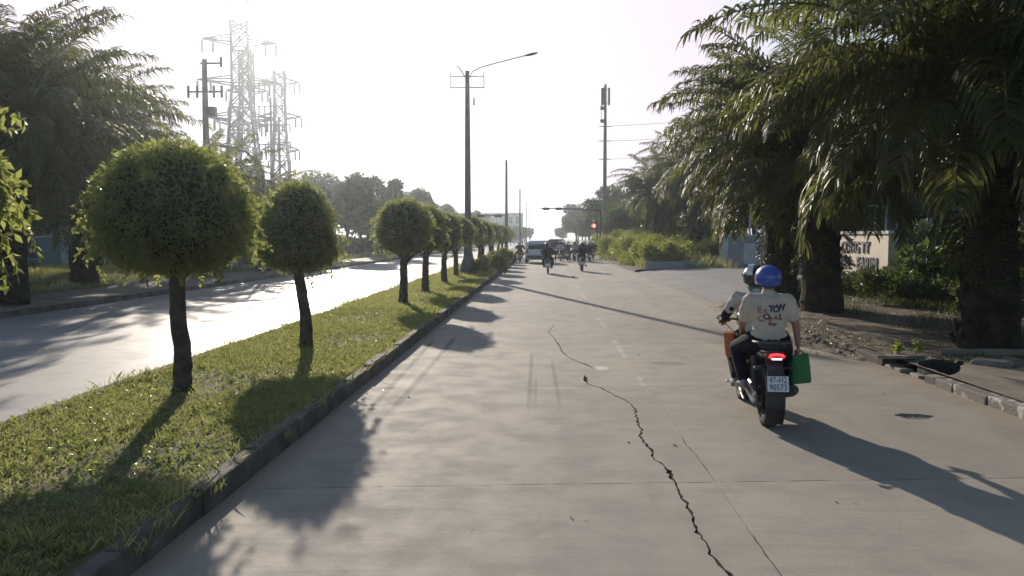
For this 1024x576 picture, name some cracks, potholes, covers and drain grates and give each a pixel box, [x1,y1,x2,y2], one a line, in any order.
crack [548,325,782,576]
